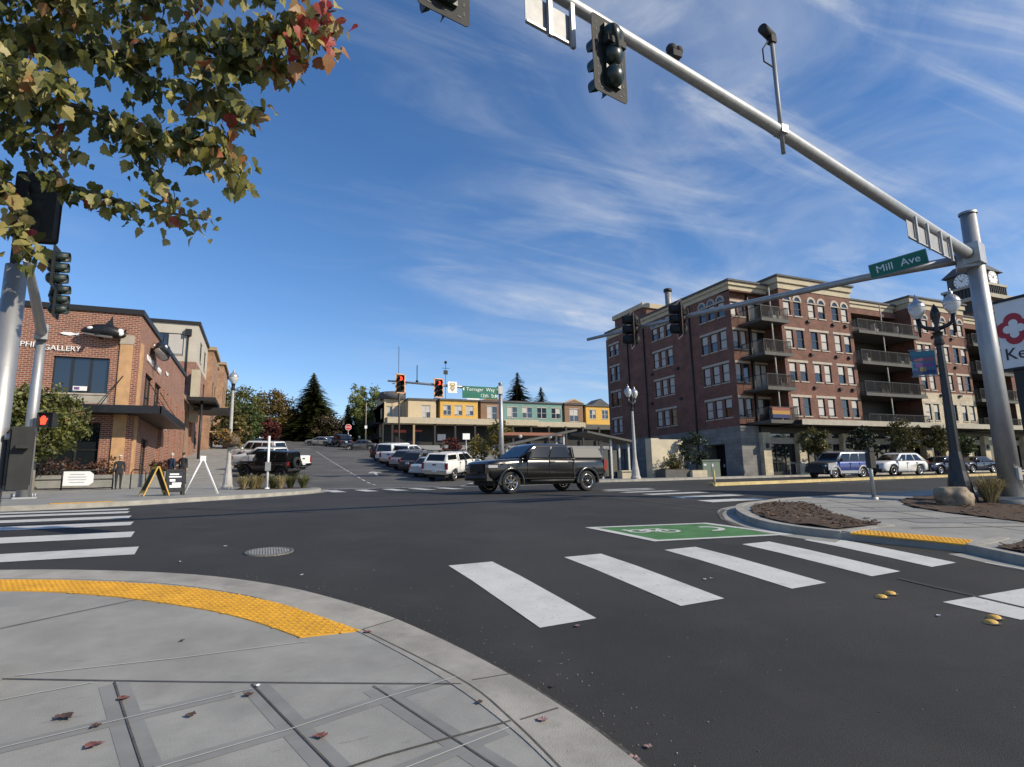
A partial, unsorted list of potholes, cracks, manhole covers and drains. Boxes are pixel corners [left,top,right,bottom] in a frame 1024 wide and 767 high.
manhole cover [244,547,294,557]
